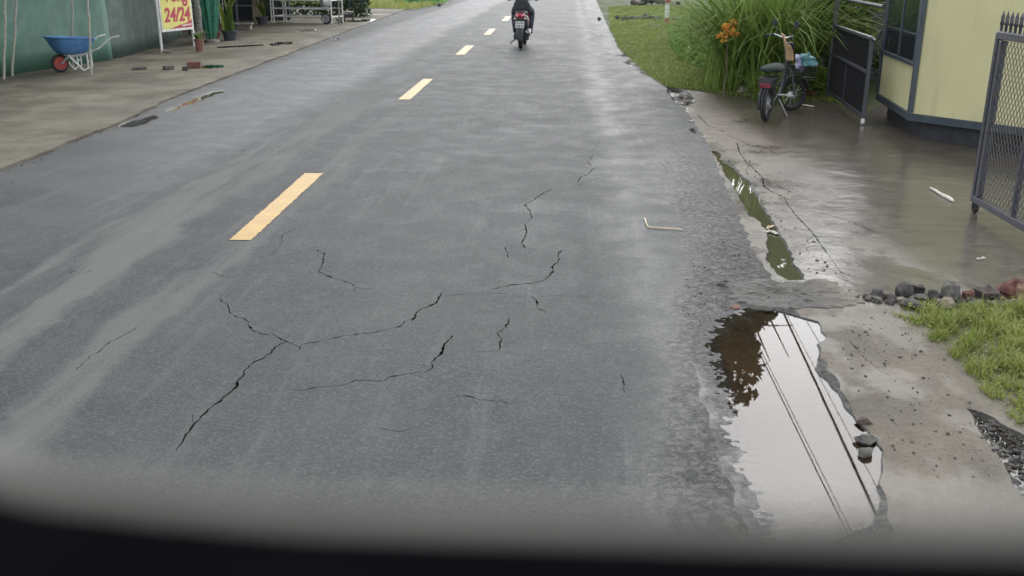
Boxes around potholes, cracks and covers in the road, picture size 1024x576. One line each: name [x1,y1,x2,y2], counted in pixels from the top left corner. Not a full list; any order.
pothole [118,114,159,127]
crack [505,190,549,257]
crack [176,250,563,450]
pothole [709,149,805,280]
crack [697,114,877,273]
pothole [163,90,226,113]
pothole [690,306,884,513]
